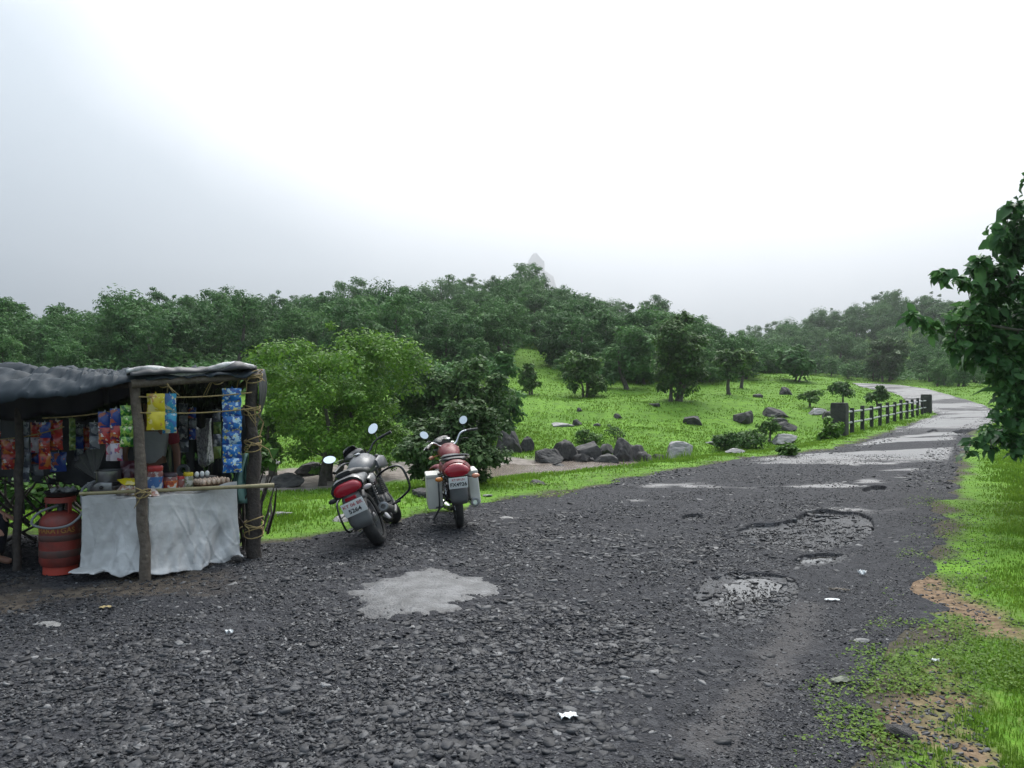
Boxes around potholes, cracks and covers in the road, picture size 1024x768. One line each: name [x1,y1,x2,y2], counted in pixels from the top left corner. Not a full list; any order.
pothole [728,511,881,550]
pothole [796,552,853,566]
pothole [683,570,806,627]
